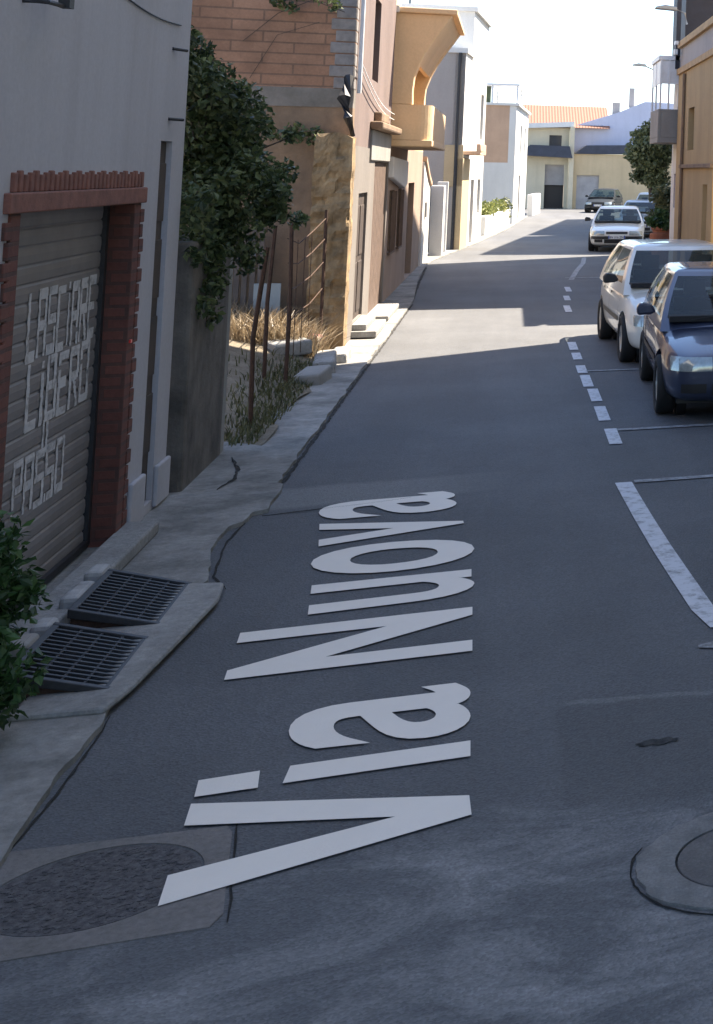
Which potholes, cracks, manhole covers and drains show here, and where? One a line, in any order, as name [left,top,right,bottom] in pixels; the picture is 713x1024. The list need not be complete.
pothole [635,737,678,747]
manhole cover [0,826,232,962]
manhole cover [635,812,713,912]
crack [227,823,237,923]
crack [217,458,240,490]
